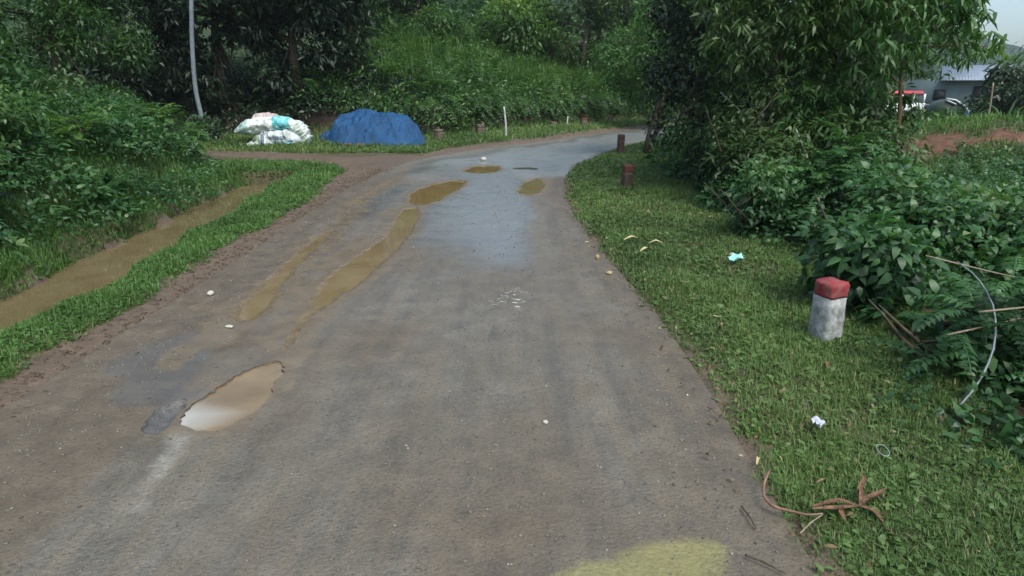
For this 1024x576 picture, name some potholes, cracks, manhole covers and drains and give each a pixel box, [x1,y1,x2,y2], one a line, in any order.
pothole [282,207,422,353]
pothole [179,361,285,431]
pothole [406,179,467,205]
pothole [461,165,504,173]
pothole [517,177,547,196]
